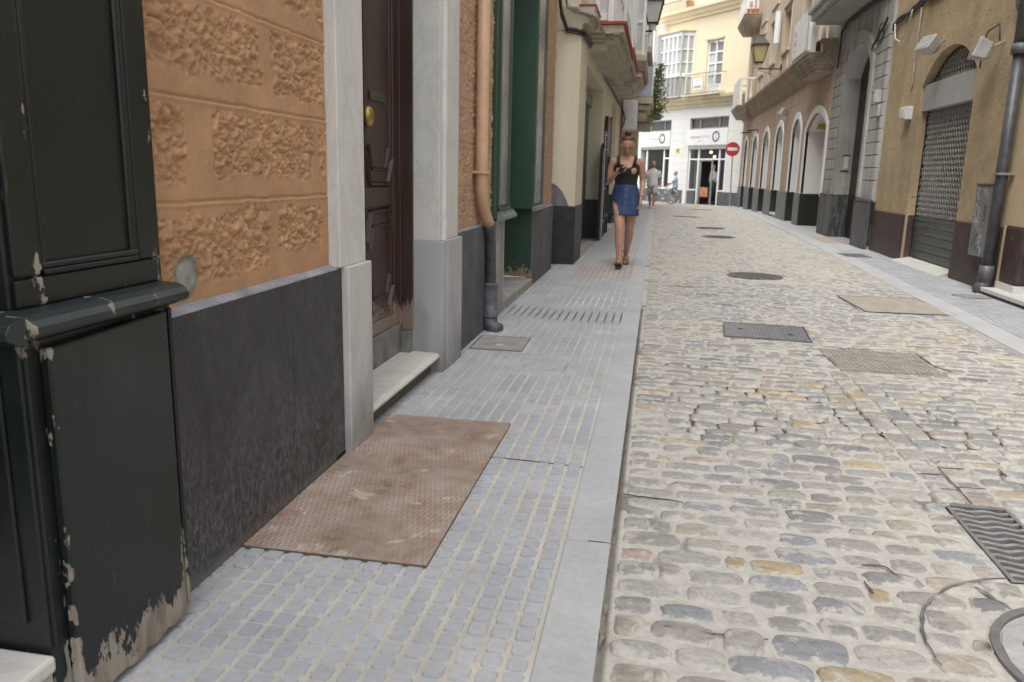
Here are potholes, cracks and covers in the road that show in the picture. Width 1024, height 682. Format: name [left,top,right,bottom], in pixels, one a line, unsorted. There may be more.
drain grate [942,502,1024,584]
manhole cover [243,414,511,568]
manhole cover [989,607,1024,682]
manhole cover [723,321,813,343]
manhole cover [836,295,955,316]
manhole cover [469,335,531,352]
manhole cover [727,272,783,280]
manhole cover [817,348,948,377]
